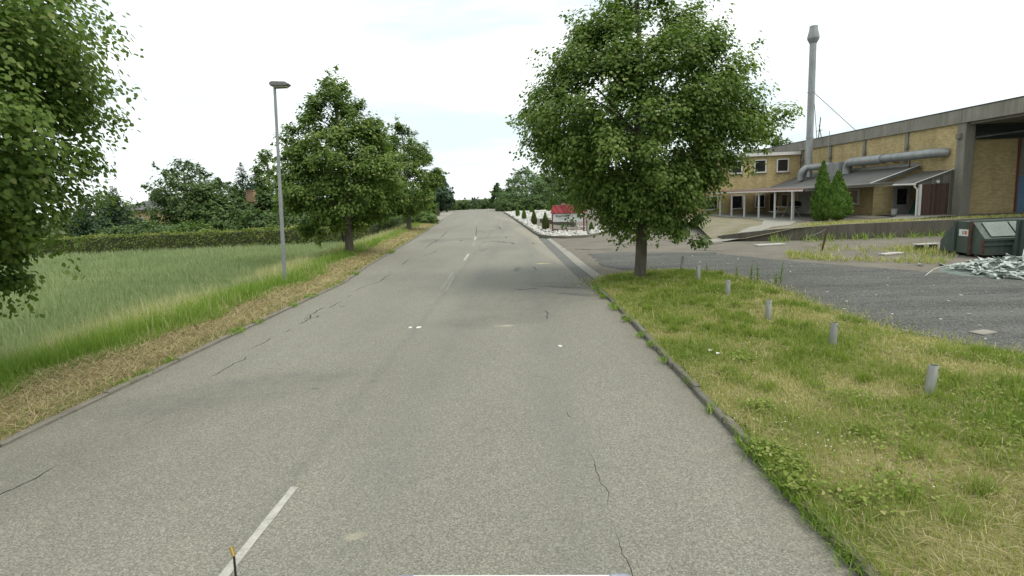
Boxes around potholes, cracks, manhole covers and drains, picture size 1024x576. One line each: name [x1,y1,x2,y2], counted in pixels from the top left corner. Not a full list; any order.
crack [288,260,408,331]
crack [0,465,58,495]
